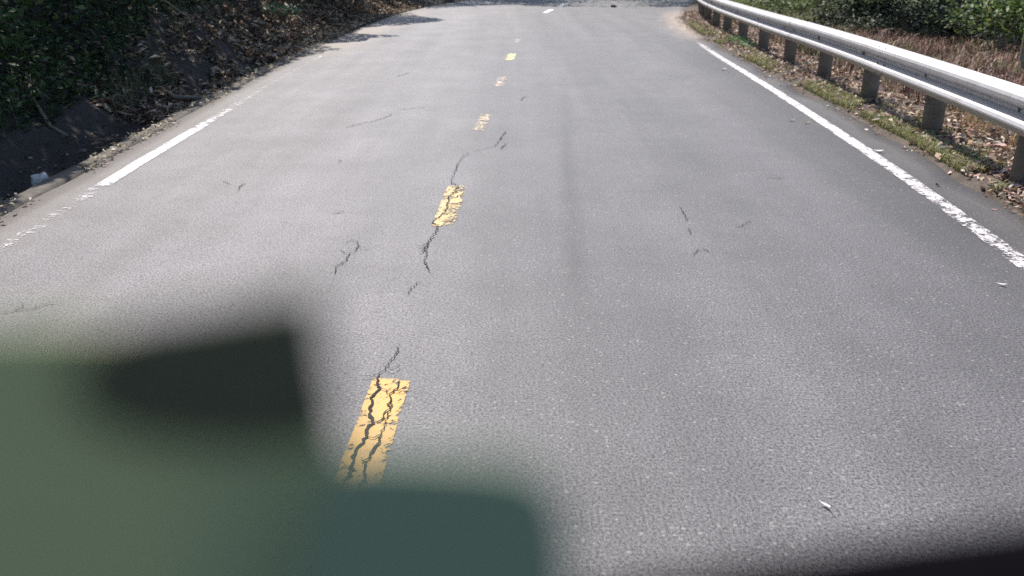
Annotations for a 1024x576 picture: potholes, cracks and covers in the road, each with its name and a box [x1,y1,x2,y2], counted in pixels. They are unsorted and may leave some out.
crack [356,344,407,448]
crack [408,131,506,294]
